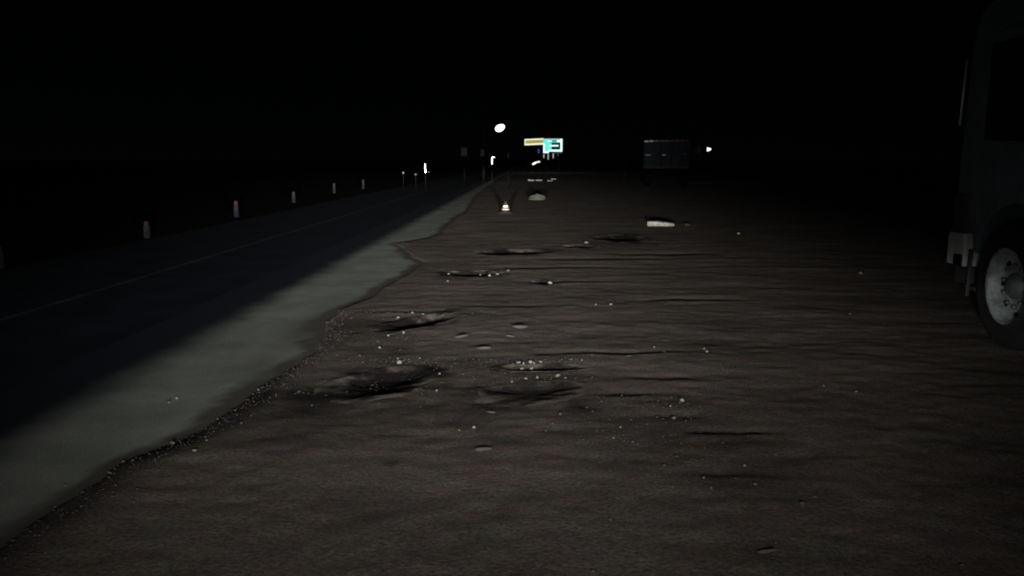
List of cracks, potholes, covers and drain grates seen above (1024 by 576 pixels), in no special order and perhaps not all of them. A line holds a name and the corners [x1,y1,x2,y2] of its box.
pothole [353,310,468,336]
pothole [433,270,511,278]
pothole [486,363,592,372]
pothole [473,379,591,407]
pothole [310,364,440,403]
pothole [587,234,649,243]
